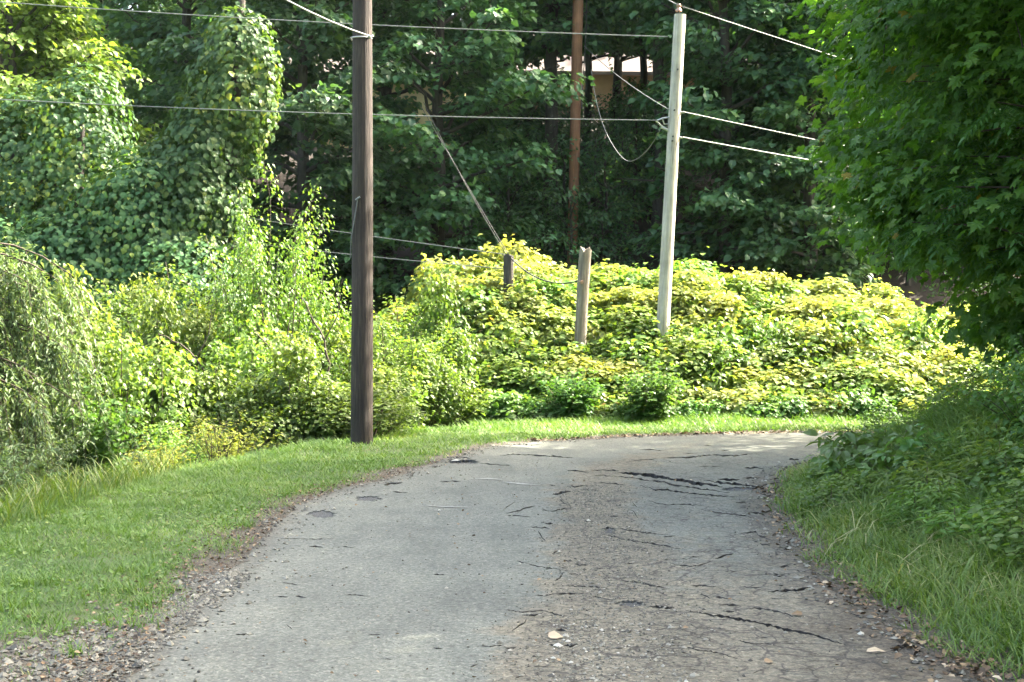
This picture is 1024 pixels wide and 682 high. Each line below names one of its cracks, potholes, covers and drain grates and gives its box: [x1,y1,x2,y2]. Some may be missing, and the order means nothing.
pothole [308,510,337,518]
crack [432,445,845,674]
